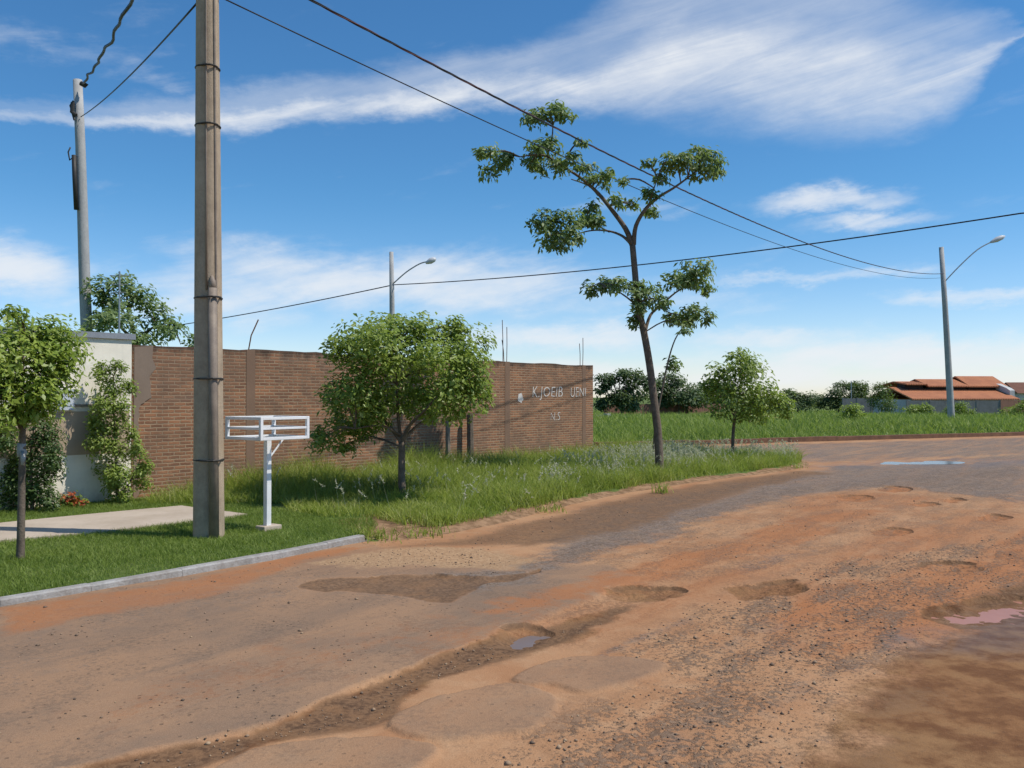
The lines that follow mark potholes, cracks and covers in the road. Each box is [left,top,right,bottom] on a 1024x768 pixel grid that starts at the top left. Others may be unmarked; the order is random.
pothole [722,579,810,602]
pothole [913,560,985,575]
pothole [975,513,1014,522]
pothole [867,527,914,536]
pothole [485,622,556,652]
pothole [600,585,689,603]
pothole [916,594,1024,631]
pothole [295,568,543,603]
